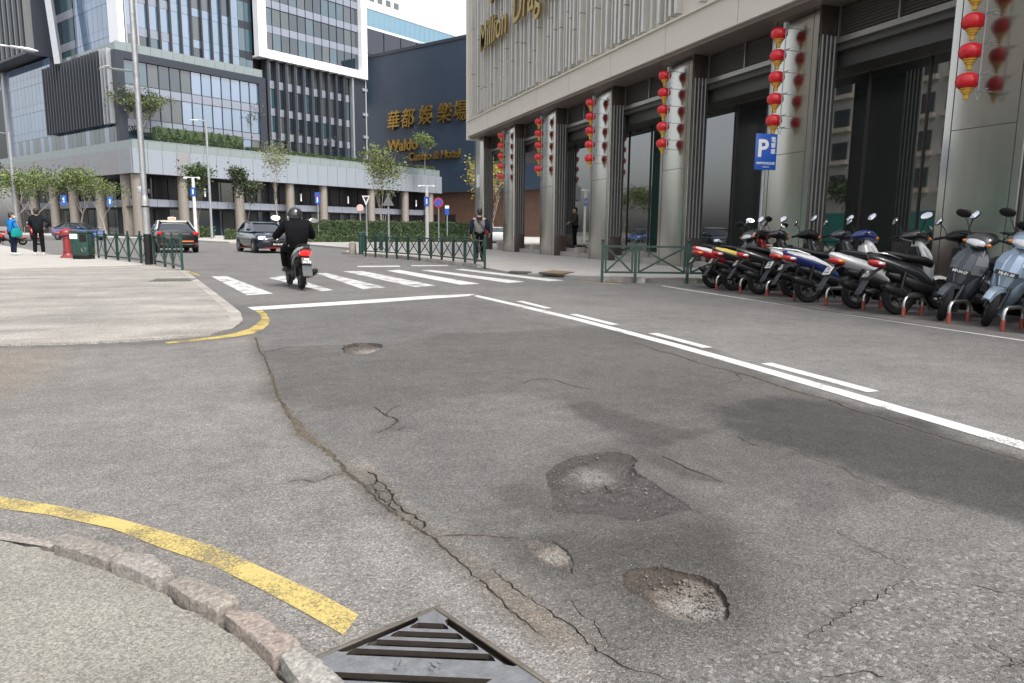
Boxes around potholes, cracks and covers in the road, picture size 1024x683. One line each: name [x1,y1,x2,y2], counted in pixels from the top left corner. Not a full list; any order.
crack [662,456,721,482]
crack [254,337,672,681]
pothole [526,538,574,574]
pothole [546,451,692,521]
pothole [341,343,383,354]
pothole [621,566,730,624]
drain grate [278,605,552,683]
